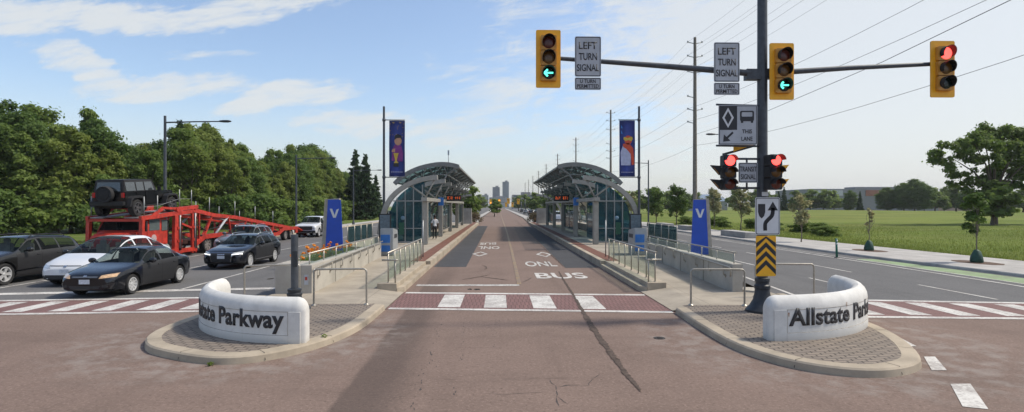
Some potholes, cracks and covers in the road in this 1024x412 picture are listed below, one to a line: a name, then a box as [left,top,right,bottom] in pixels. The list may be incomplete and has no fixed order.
crack [410,318,605,410]
